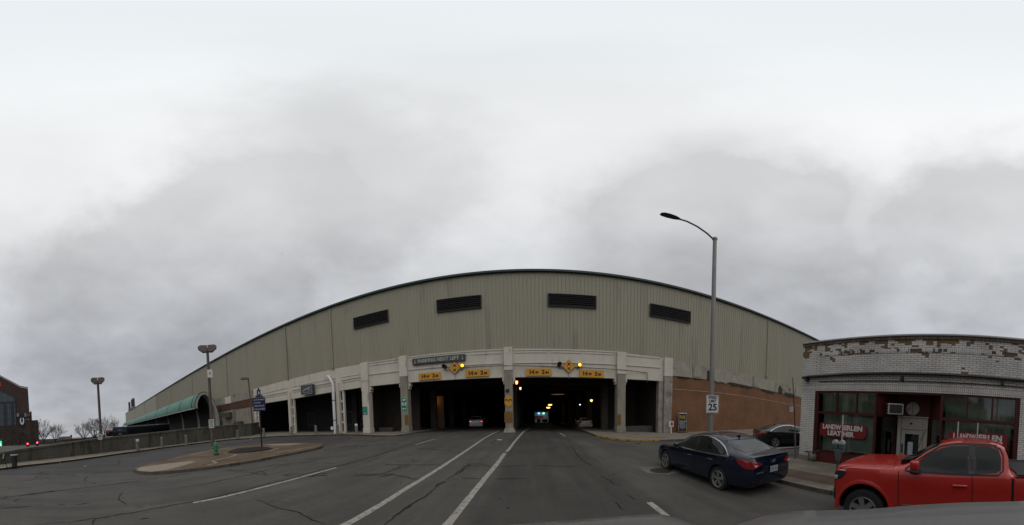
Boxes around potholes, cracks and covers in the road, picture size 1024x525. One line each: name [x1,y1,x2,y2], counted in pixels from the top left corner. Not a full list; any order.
crack [1,434,567,524]
